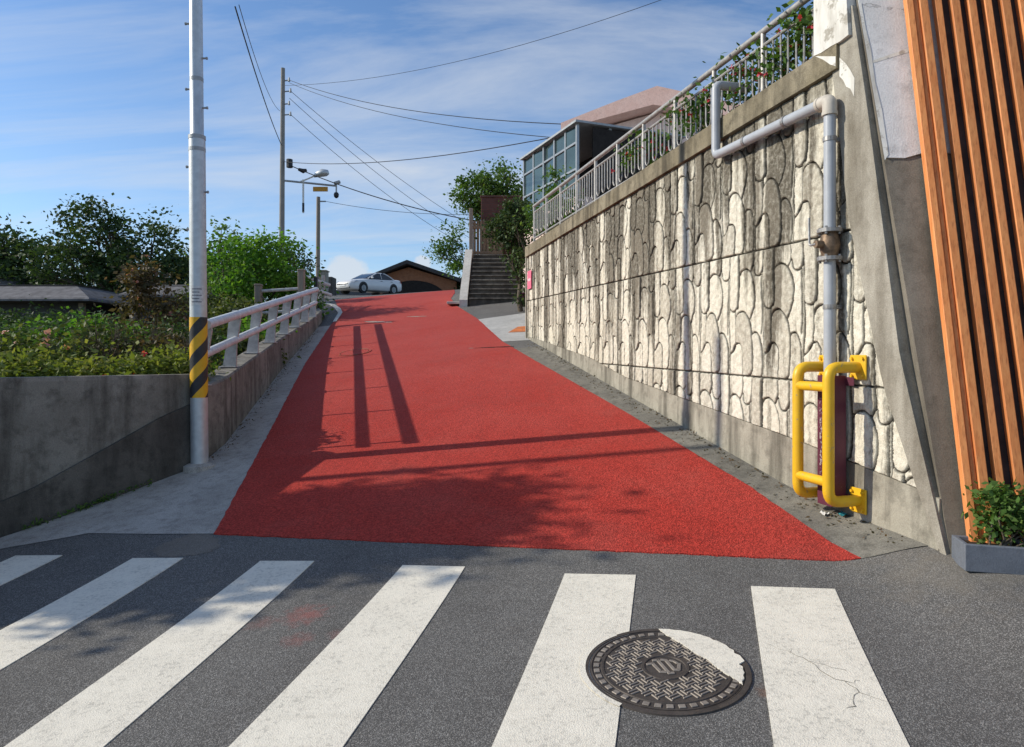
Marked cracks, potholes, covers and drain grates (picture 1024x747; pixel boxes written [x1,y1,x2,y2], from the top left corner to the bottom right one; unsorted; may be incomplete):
manhole cover [579,629,752,717]
crack [781,648,897,708]
